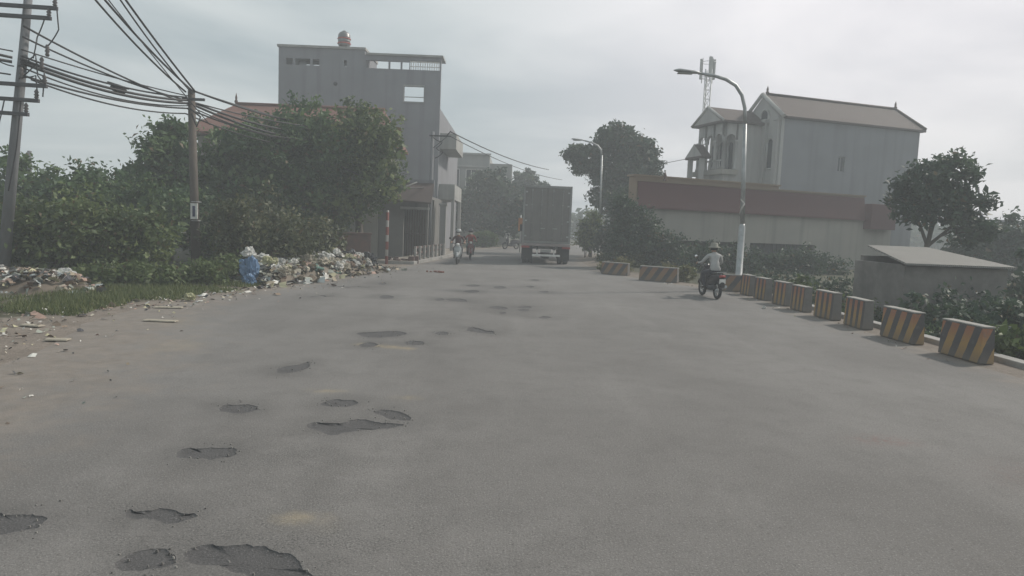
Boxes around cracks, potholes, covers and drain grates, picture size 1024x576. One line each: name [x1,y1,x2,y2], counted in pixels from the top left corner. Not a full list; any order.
pothole [0,513,47,535]
pothole [176,447,237,460]
pothole [219,404,258,413]
pothole [115,548,176,571]
pothole [320,399,358,407]
pothole [307,419,403,435]
pothole [374,410,411,421]
pothole [184,544,313,576]
pothole [276,362,310,373]
pothole [125,508,196,524]
